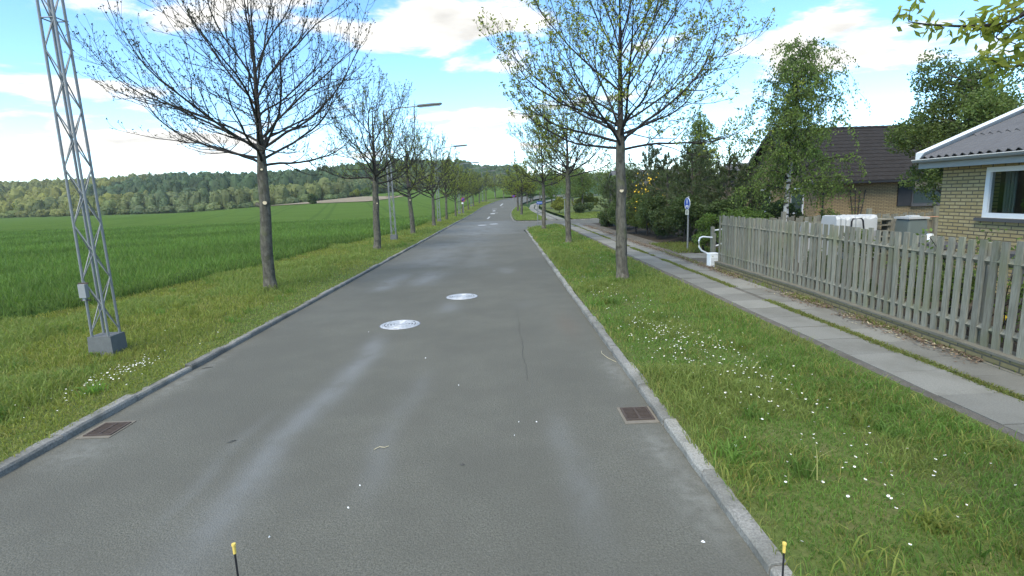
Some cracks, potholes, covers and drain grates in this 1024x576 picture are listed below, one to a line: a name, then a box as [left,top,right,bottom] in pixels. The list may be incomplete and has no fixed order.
drain grate [617,406,660,424]
manhole cover [379,320,421,330]
drain grate [75,420,137,439]
